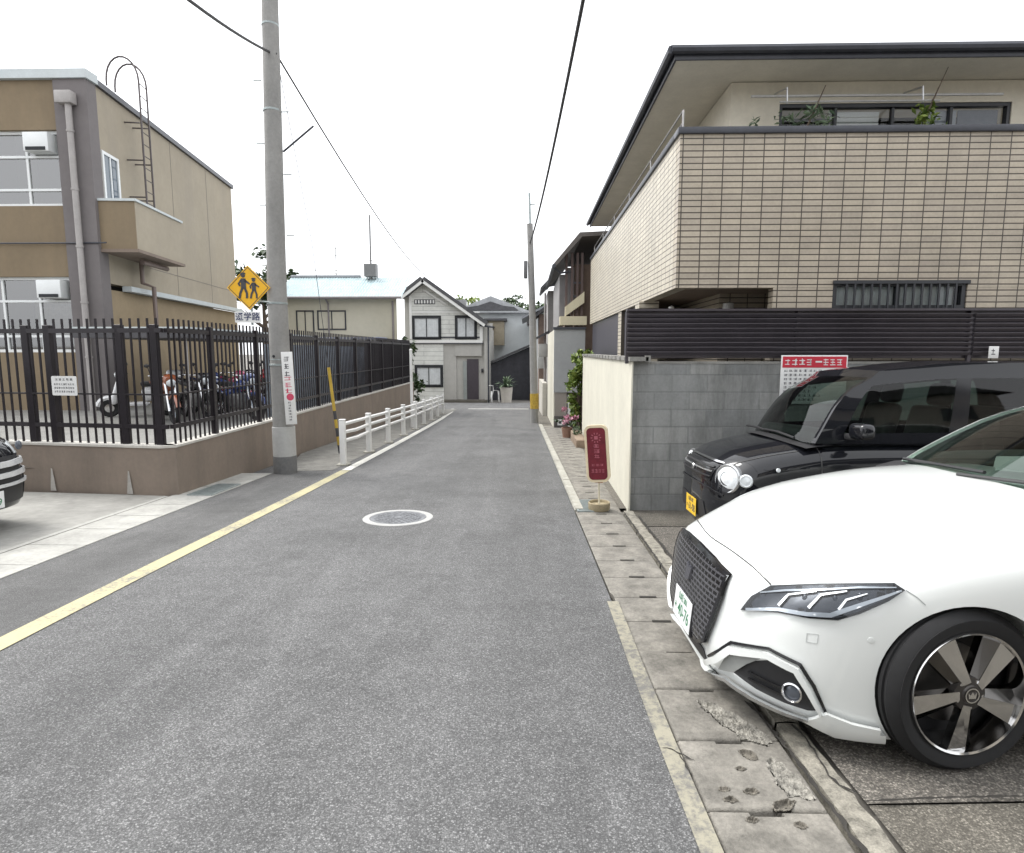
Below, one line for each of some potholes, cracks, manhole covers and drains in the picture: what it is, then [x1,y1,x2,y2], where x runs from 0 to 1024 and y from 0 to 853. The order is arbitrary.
manhole cover [362,510,433,526]
pothole [765,757,816,801]
crack [664,747,693,774]
pothole [696,699,772,746]
drain grate [187,483,241,496]
